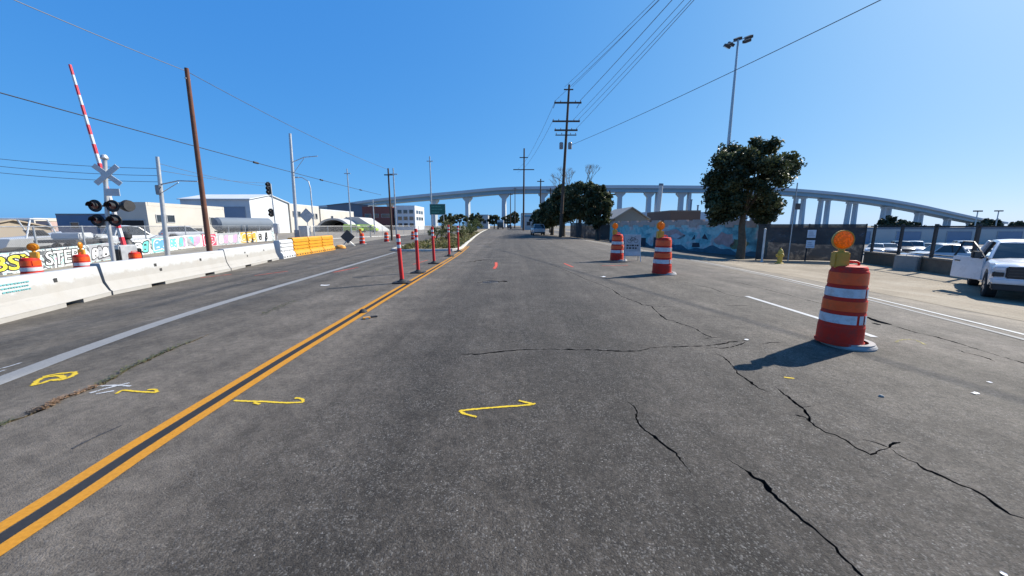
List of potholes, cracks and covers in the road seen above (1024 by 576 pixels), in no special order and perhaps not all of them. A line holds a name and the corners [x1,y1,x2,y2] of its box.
crack [467,267,1024,576]
